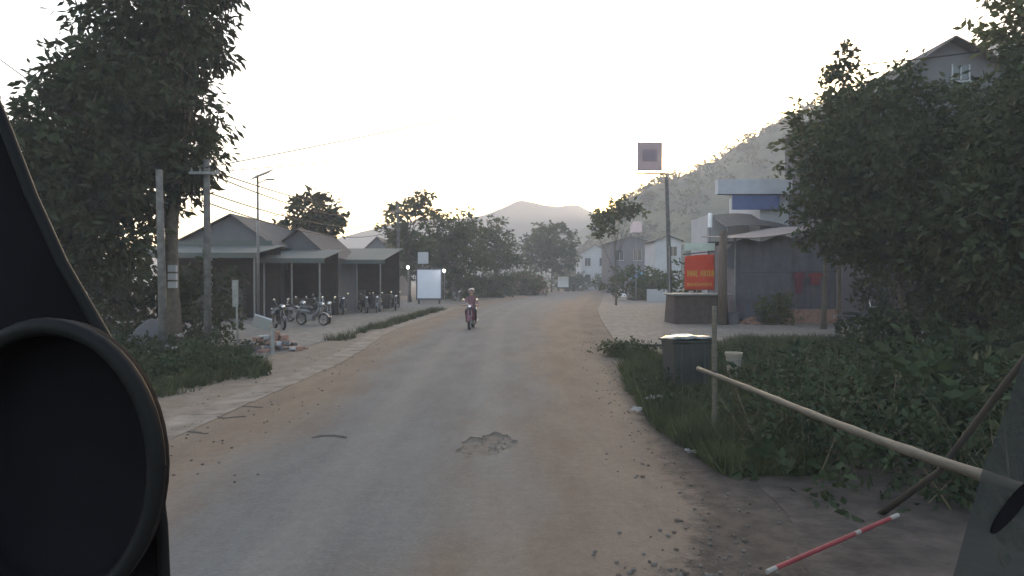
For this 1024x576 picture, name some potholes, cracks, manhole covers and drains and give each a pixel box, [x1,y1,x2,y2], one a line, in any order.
pothole [455,431,518,458]
